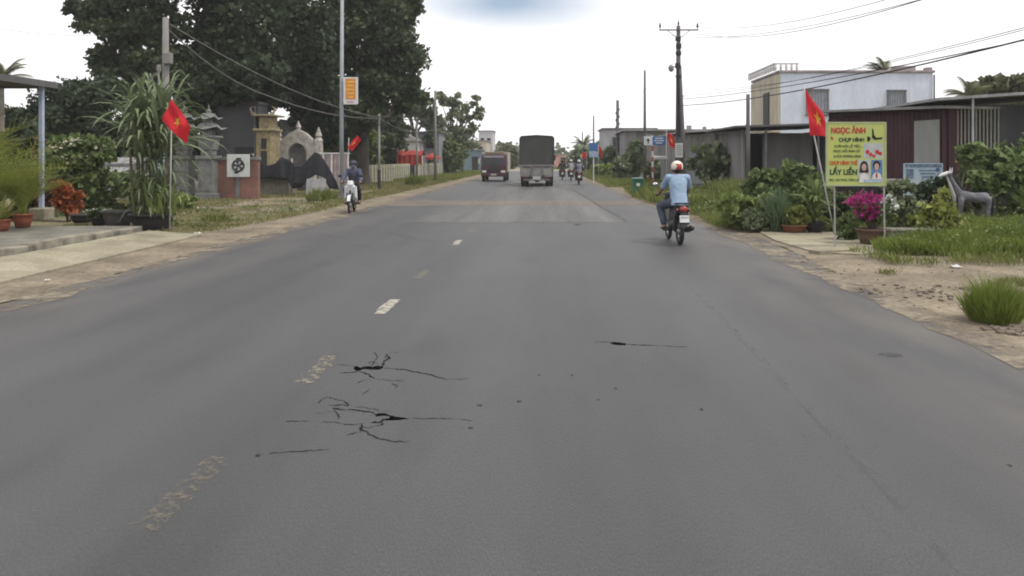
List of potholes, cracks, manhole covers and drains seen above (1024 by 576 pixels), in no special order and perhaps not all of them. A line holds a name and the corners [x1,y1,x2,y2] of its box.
crack [314,352,467,442]
